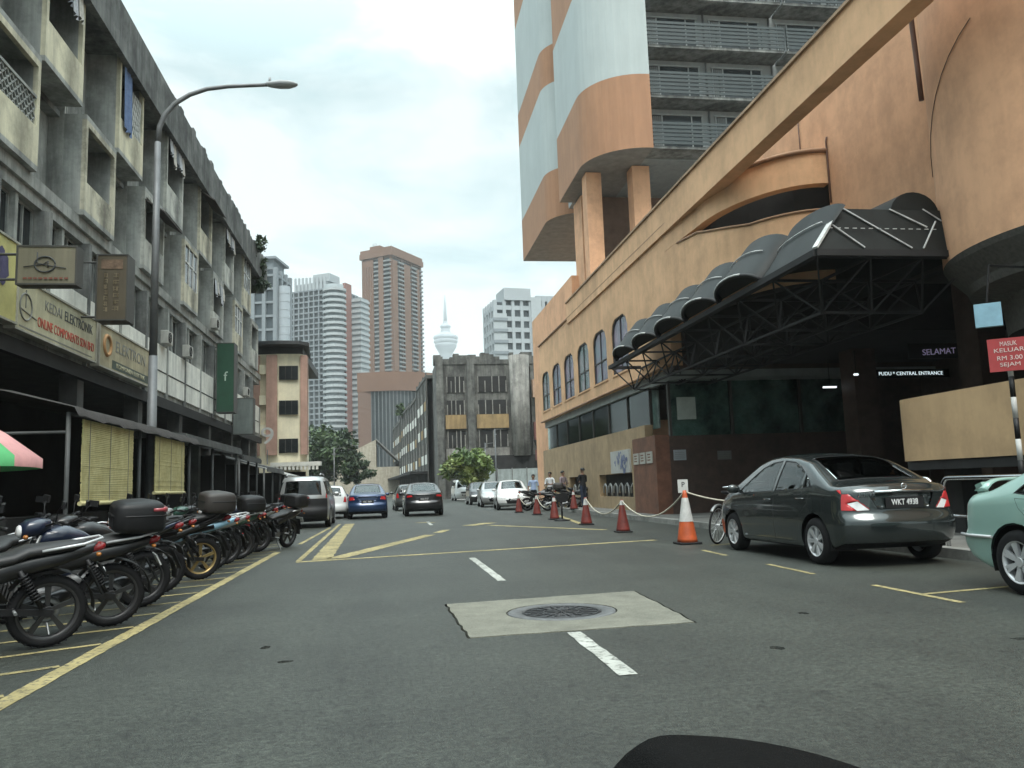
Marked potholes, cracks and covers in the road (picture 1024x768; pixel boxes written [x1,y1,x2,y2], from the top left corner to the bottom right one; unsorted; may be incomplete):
manhole cover [508,603,616,621]
